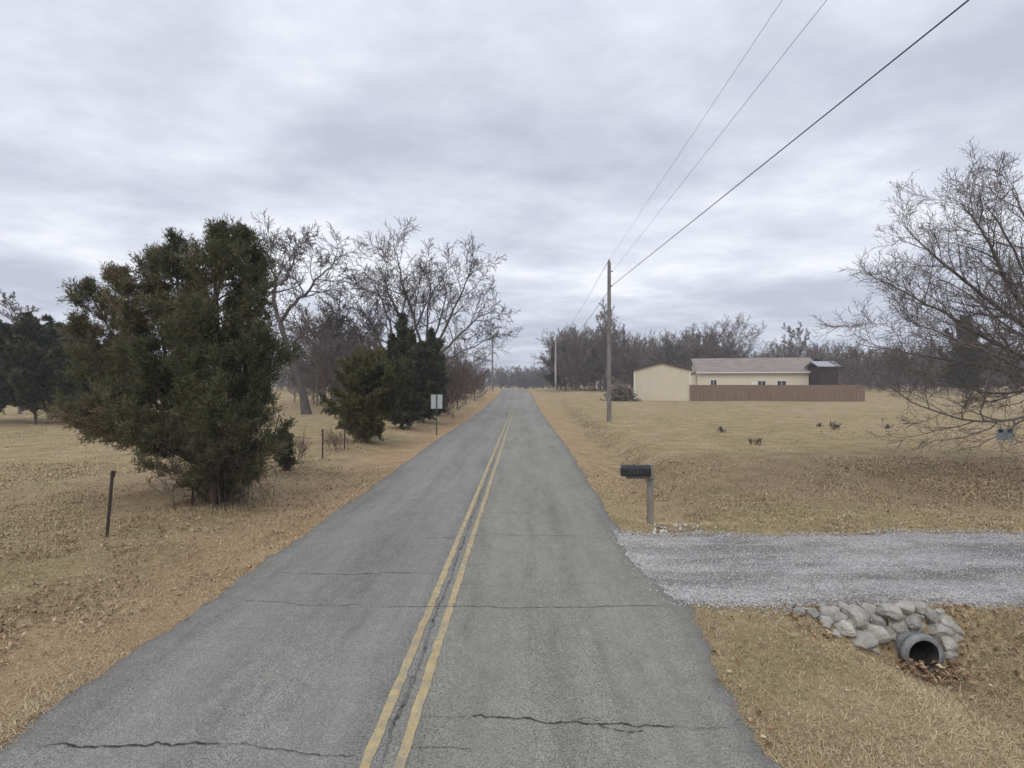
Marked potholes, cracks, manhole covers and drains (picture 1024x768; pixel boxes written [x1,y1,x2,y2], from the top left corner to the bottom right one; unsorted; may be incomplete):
crack [249,600,663,608]
crack [38,741,359,757]
crack [428,714,726,732]
